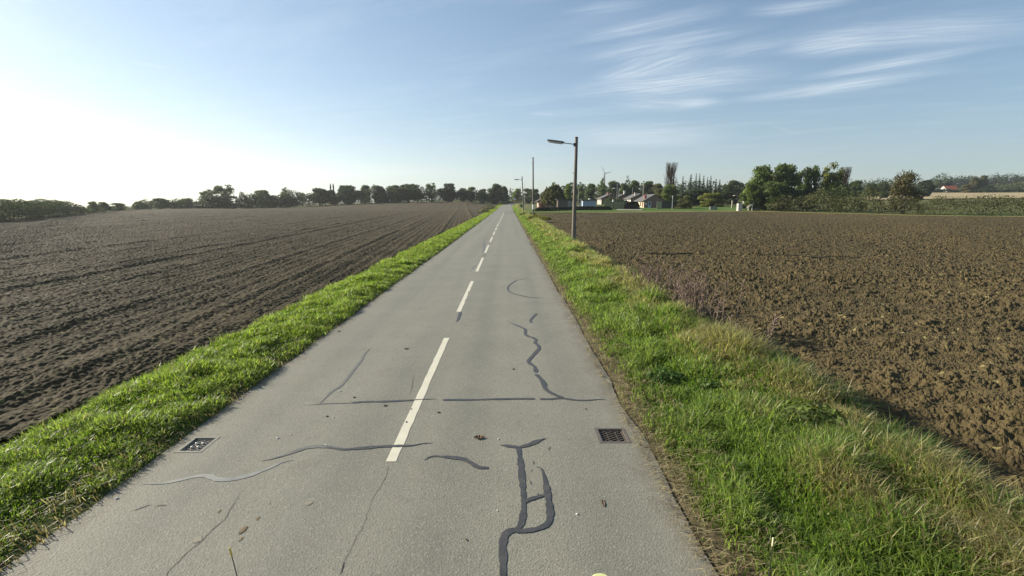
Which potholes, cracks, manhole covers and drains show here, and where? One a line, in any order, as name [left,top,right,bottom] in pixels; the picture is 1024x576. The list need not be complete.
crack [166,488,245,575]
drain grate [594,428,632,443]
drain grate [174,437,220,453]
